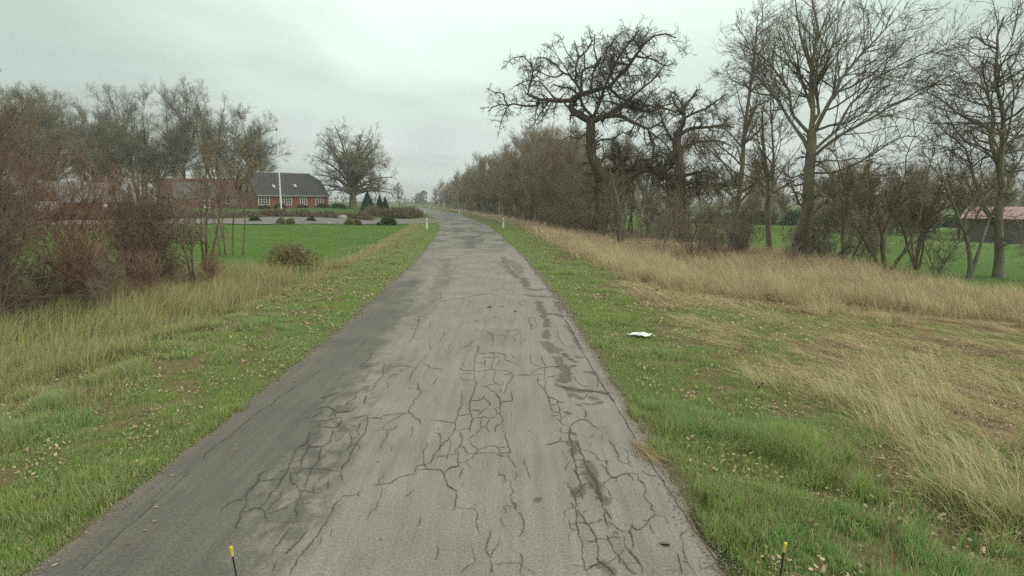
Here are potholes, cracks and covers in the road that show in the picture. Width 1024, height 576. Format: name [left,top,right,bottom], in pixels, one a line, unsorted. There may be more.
crack [530,317,724,574]
crack [224,262,537,574]
